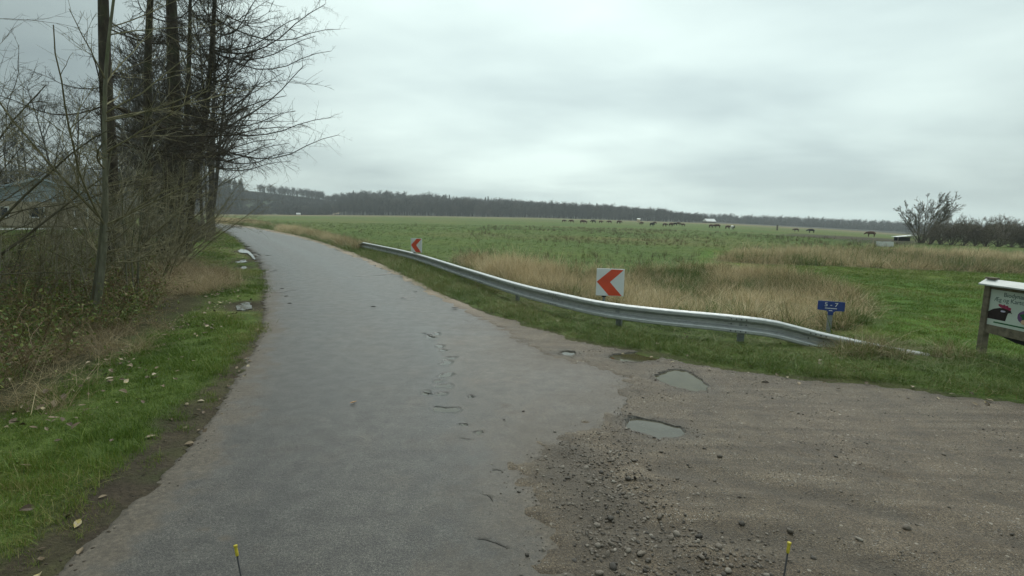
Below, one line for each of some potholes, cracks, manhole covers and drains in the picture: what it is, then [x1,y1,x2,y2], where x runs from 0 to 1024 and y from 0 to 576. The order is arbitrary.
pothole [607,351,657,362]
pothole [623,415,687,439]
pothole [653,368,710,391]
